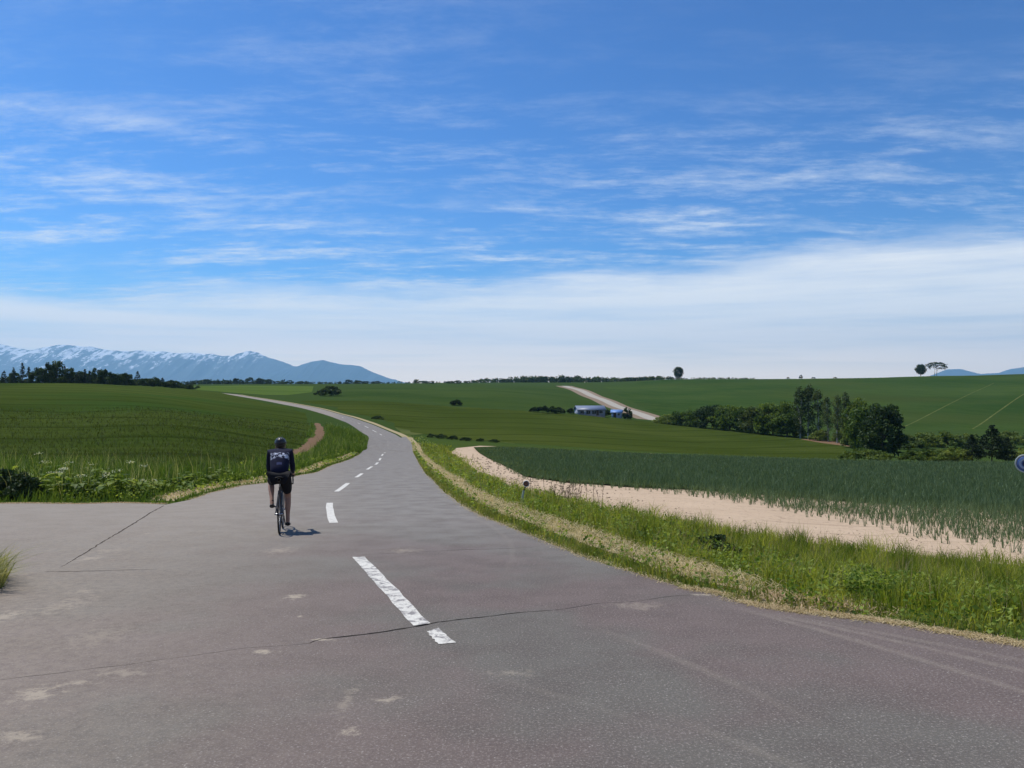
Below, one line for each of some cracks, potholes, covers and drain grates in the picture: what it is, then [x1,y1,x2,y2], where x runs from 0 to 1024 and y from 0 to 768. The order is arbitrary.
crack [2,595,682,680]
